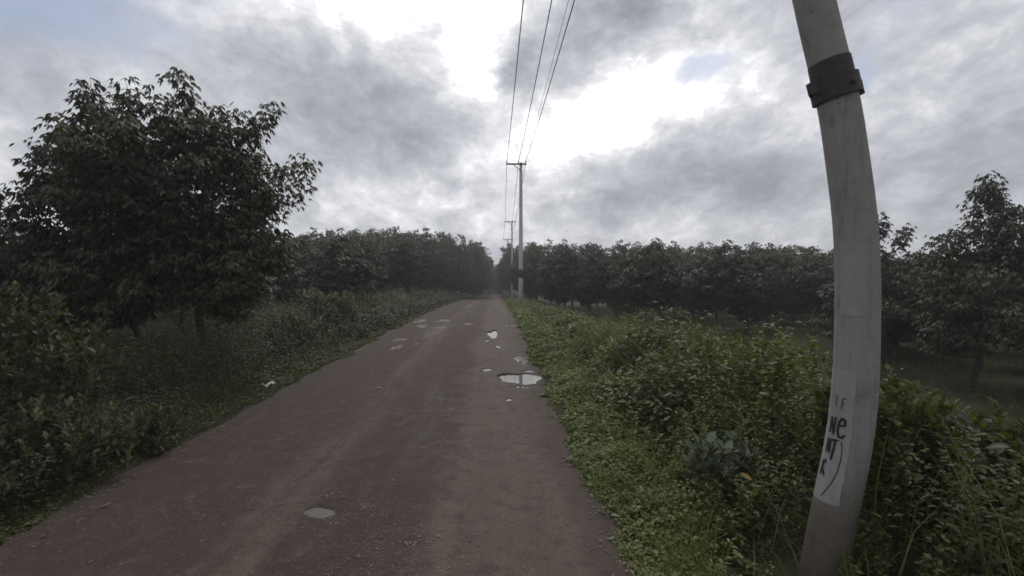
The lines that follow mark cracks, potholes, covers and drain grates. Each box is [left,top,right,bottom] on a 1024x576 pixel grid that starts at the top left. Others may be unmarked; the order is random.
pothole [497,373,542,385]
pothole [512,355,530,365]
